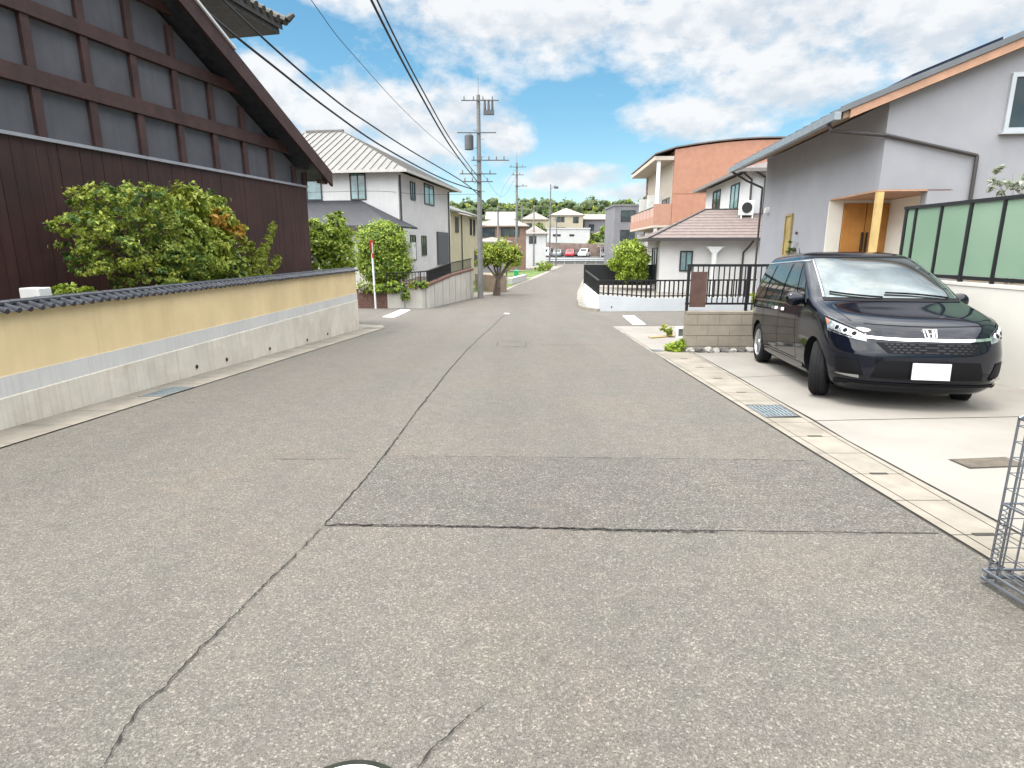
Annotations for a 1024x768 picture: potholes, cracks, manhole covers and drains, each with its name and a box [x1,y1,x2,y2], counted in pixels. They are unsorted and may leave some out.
utility cover [948,457,1022,469]
crack [417,704,485,768]
drain grate [746,404,798,417]
drain grate [138,386,196,397]
